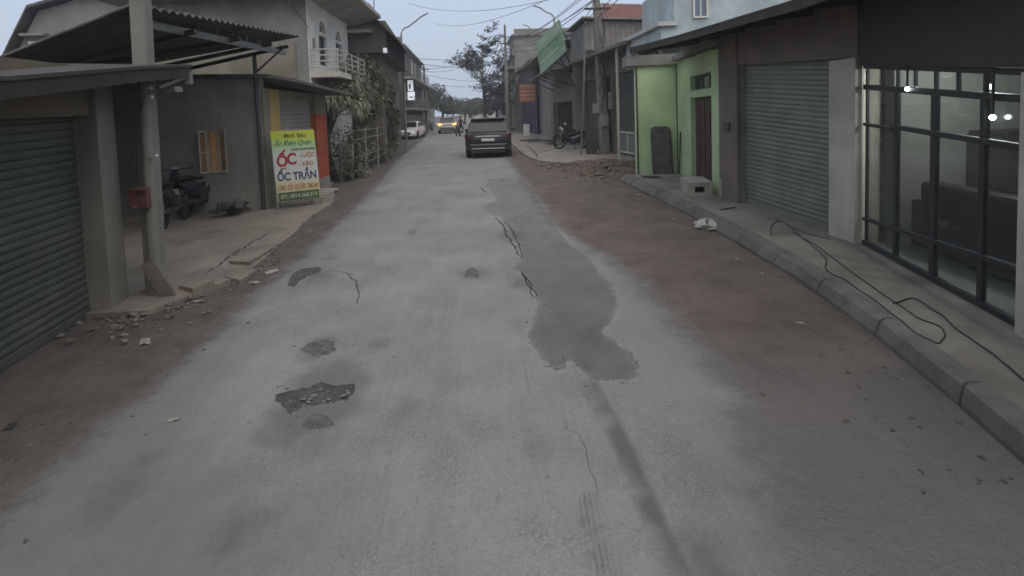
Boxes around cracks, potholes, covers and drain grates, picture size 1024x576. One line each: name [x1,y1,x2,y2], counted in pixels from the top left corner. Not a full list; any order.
crack [495,212,552,298]
crack [336,270,360,304]
crack [205,229,284,274]
pothole [275,382,355,415]
pothole [287,267,321,288]
pothole [302,413,335,430]
pothole [300,339,337,356]
pothole [464,267,480,279]
